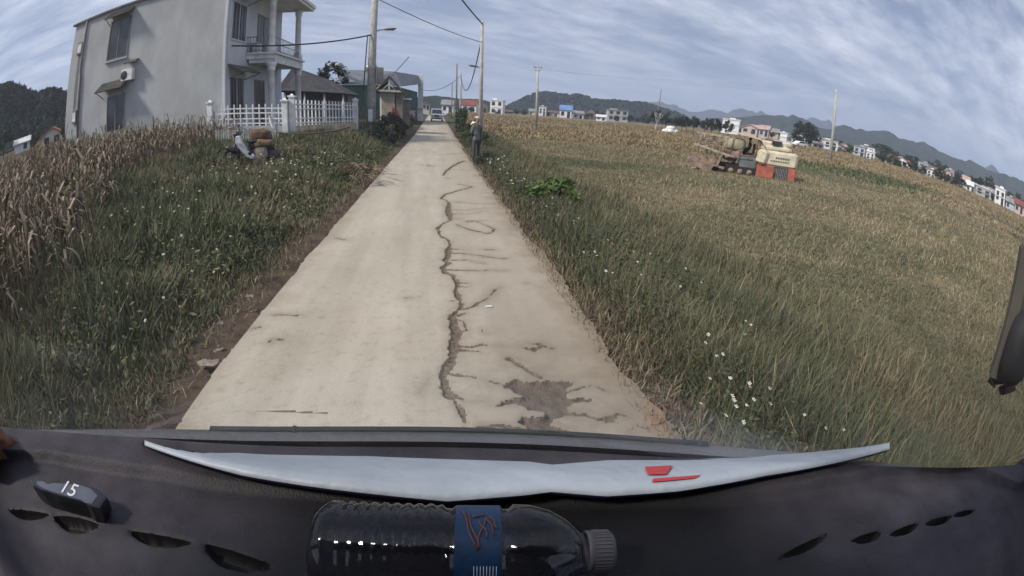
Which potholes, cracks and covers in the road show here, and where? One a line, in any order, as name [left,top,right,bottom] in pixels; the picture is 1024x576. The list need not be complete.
pothole [476,379,627,431]
crack [427,153,543,423]
